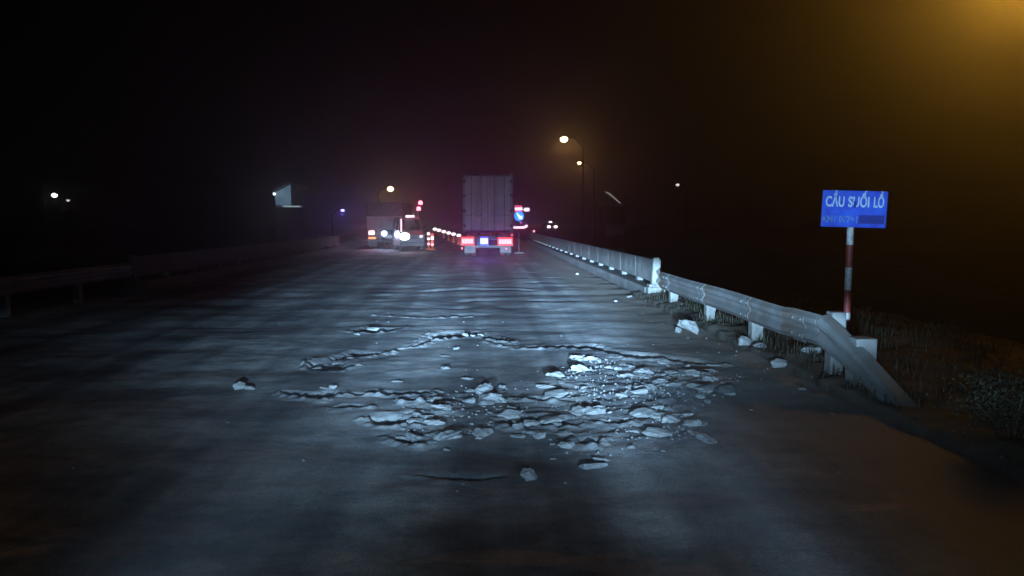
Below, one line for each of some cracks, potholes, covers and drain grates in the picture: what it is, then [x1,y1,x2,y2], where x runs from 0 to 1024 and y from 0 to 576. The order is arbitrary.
pothole [502,393,572,405]
pothole [374,430,440,452]
crack [477,340,537,349]
pothole [483,411,590,433]
pothole [351,409,435,431]
pothole [567,414,646,429]
pothole [559,432,617,451]
